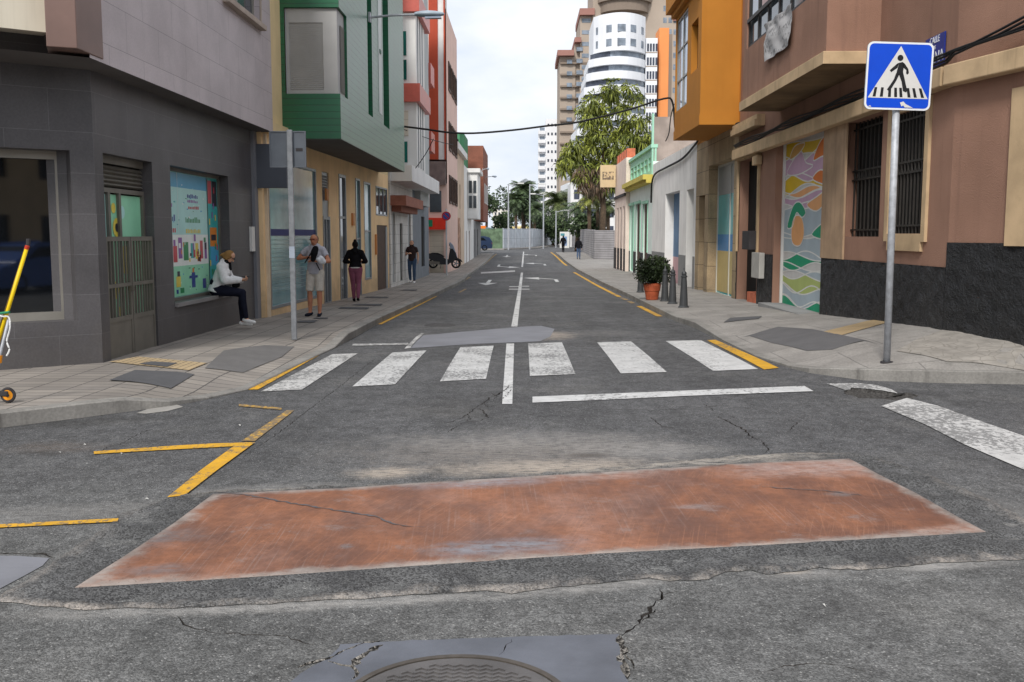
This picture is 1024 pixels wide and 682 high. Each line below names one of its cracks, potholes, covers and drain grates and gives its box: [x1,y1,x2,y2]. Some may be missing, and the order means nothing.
crack [447,377,759,432]
crack [226,492,424,527]
pothole [844,388,918,400]
manhole cover [355,654,561,682]
crack [616,589,677,679]
crack [177,616,382,680]
crack [496,403,769,451]
